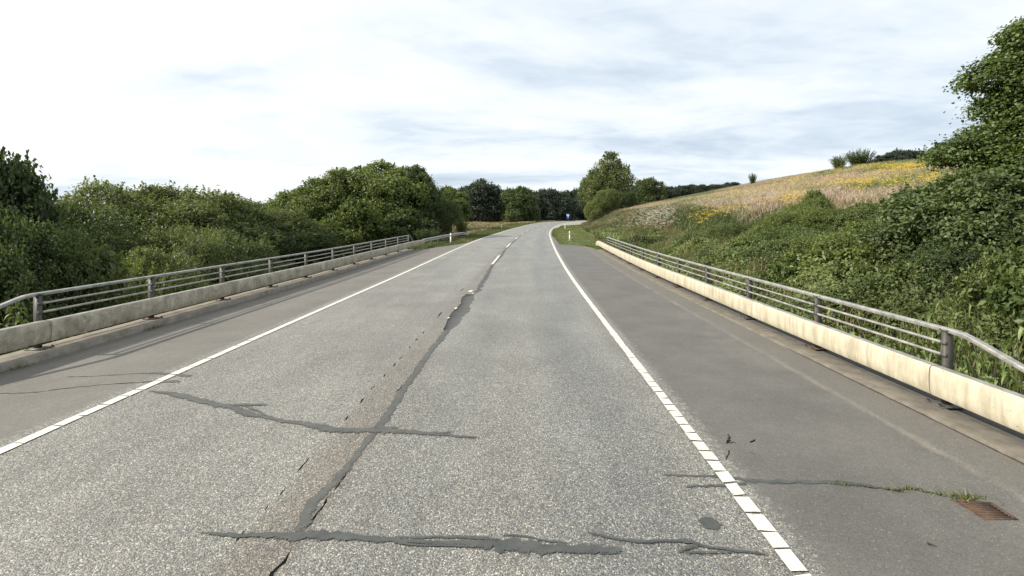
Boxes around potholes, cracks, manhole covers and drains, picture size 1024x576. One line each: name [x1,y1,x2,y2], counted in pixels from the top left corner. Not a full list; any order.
drain grate [951,499,1019,520]
crack [0,372,191,394]
crack [664,474,945,497]
